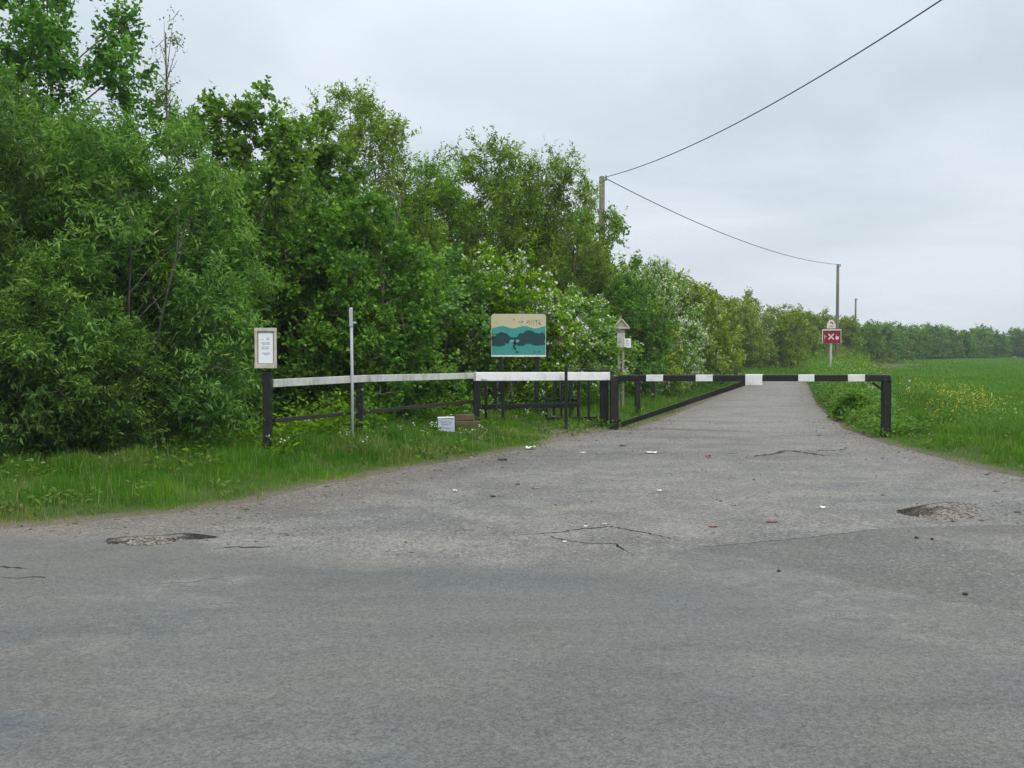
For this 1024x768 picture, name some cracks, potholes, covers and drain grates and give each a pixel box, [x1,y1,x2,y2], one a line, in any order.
pothole [897,502,984,522]
pothole [105,533,217,546]
crack [501,526,679,555]
crack [0,566,46,579]
crack [732,449,844,458]
